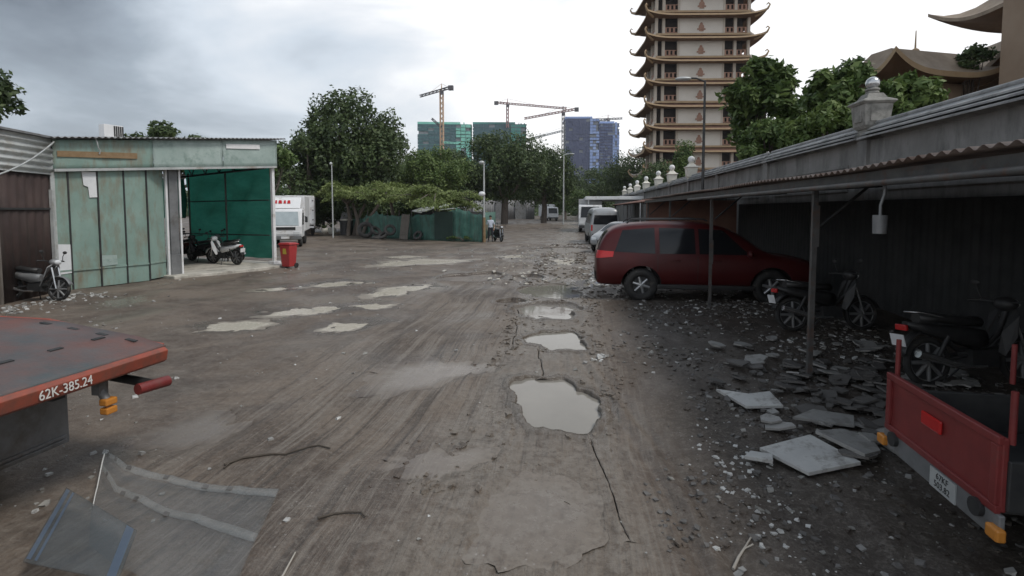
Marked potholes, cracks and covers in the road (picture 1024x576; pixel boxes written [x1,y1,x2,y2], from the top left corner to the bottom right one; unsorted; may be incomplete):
pothole [502,300,590,321]
pothole [502,373,613,442]
pothole [489,297,532,305]
crack [586,434,639,543]
pothole [509,283,590,301]
pothole [515,329,594,354]
crack [509,309,548,380]
